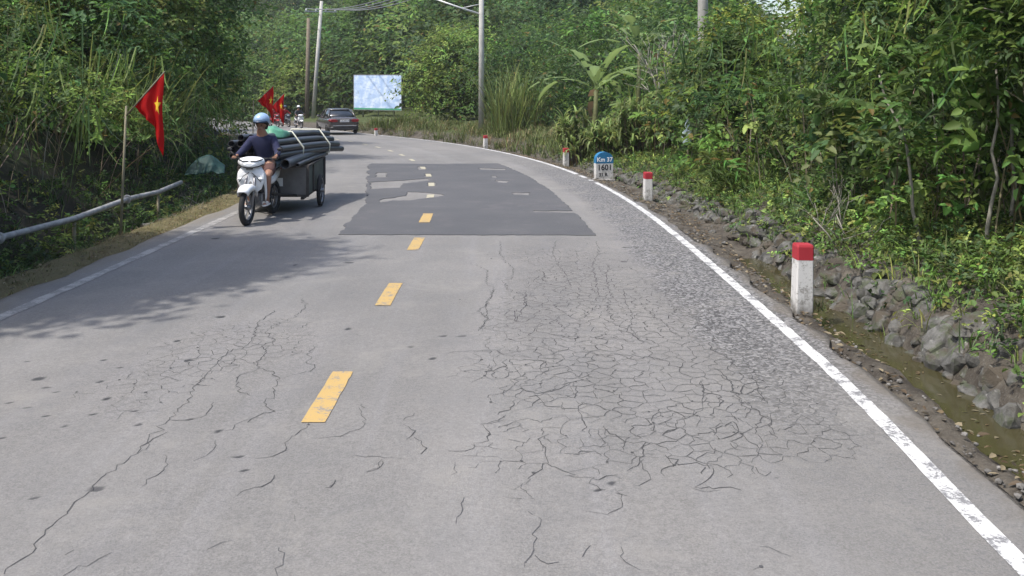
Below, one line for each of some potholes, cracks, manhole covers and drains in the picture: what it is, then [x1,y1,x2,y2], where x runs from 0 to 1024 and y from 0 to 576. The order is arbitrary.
crack [240,404,427,493]
crack [448,241,859,515]
crack [4,300,316,576]
